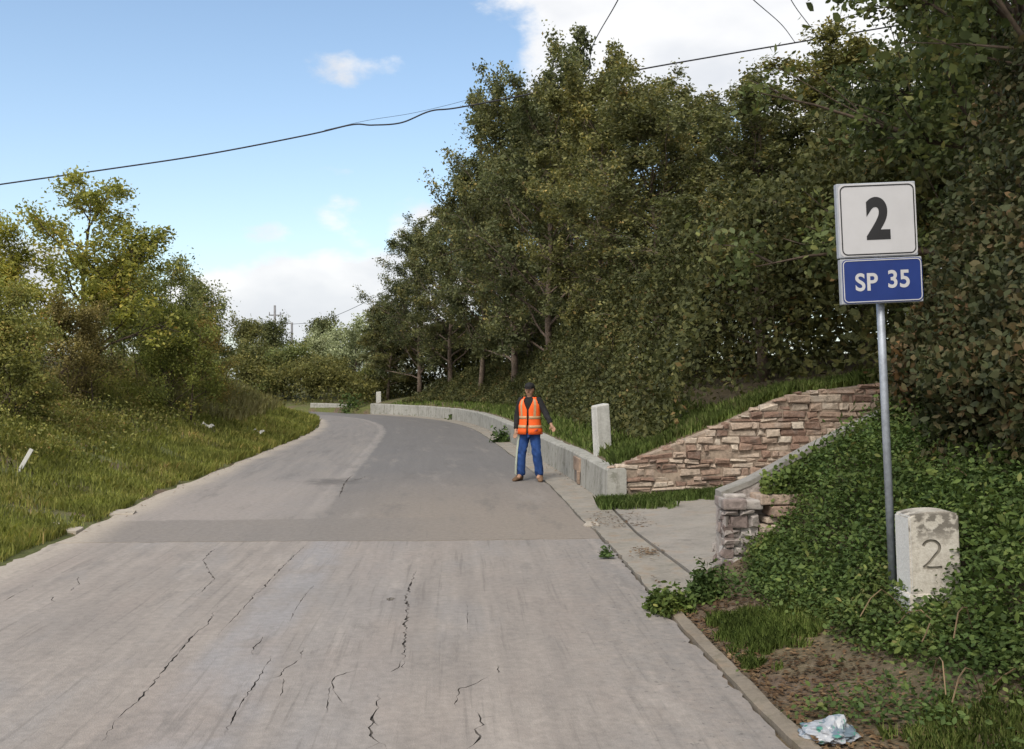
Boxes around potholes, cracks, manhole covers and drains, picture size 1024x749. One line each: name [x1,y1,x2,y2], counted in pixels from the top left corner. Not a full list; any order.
crack [326,671,353,712]
crack [226,585,314,730]
crack [368,696,386,747]
crack [470,714,484,747]
crack [106,552,298,734]
crack [391,575,414,672]
